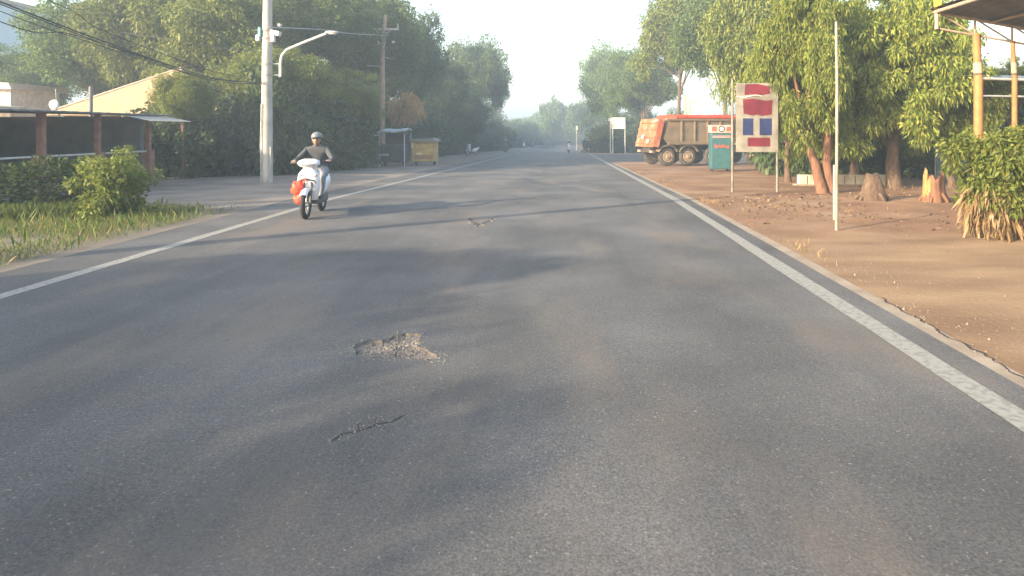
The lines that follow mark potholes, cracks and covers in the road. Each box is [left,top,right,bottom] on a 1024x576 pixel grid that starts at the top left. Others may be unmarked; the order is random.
crack [329,414,407,443]
crack [875,296,1024,378]
pothole [336,329,447,363]
crack [466,218,499,228]
